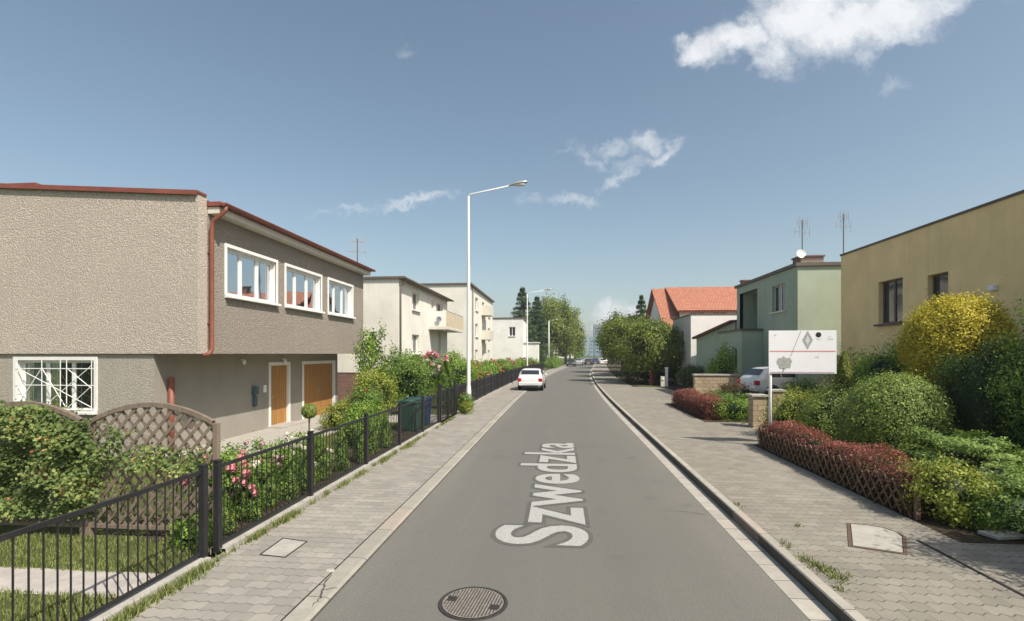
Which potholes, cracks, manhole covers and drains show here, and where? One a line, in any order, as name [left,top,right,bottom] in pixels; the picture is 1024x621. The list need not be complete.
manhole cover [847,523,908,555]
crack [313,574,337,605]
manhole cover [438,587,508,621]
manhole cover [259,538,308,558]
